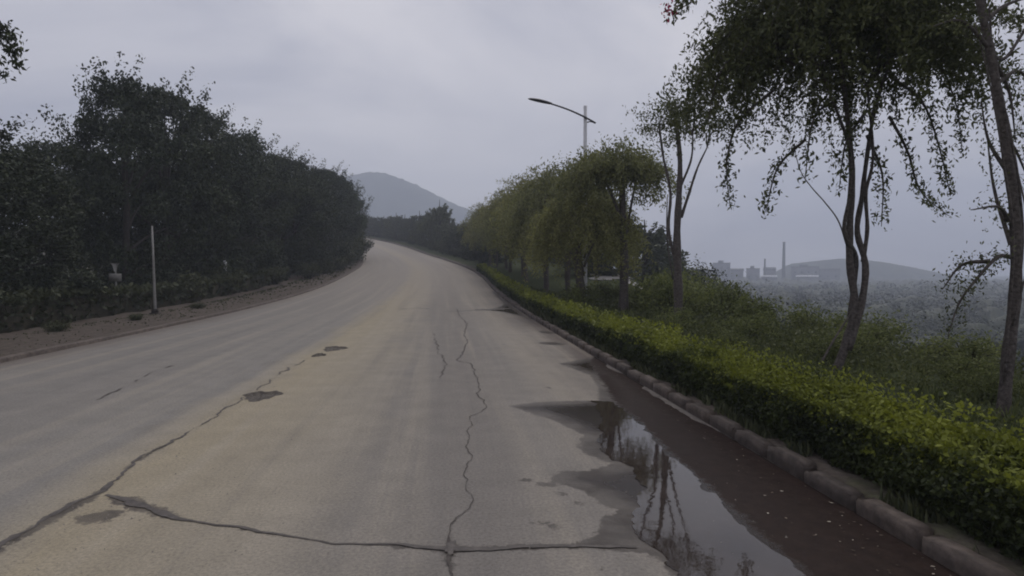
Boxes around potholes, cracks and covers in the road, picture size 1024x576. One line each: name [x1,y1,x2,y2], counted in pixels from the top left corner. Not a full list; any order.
crack [106,308,637,576]
pothole [243,390,283,402]
